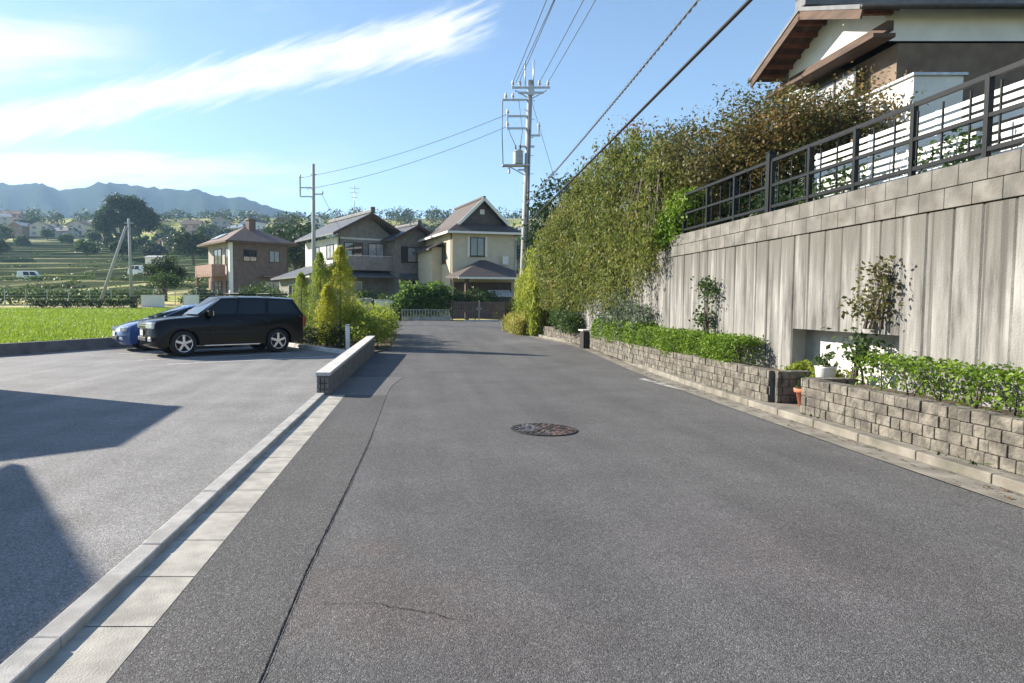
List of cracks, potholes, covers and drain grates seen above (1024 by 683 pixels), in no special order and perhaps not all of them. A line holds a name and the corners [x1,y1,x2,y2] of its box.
manhole cover [511,423,577,436]
crack [327,602,464,620]
